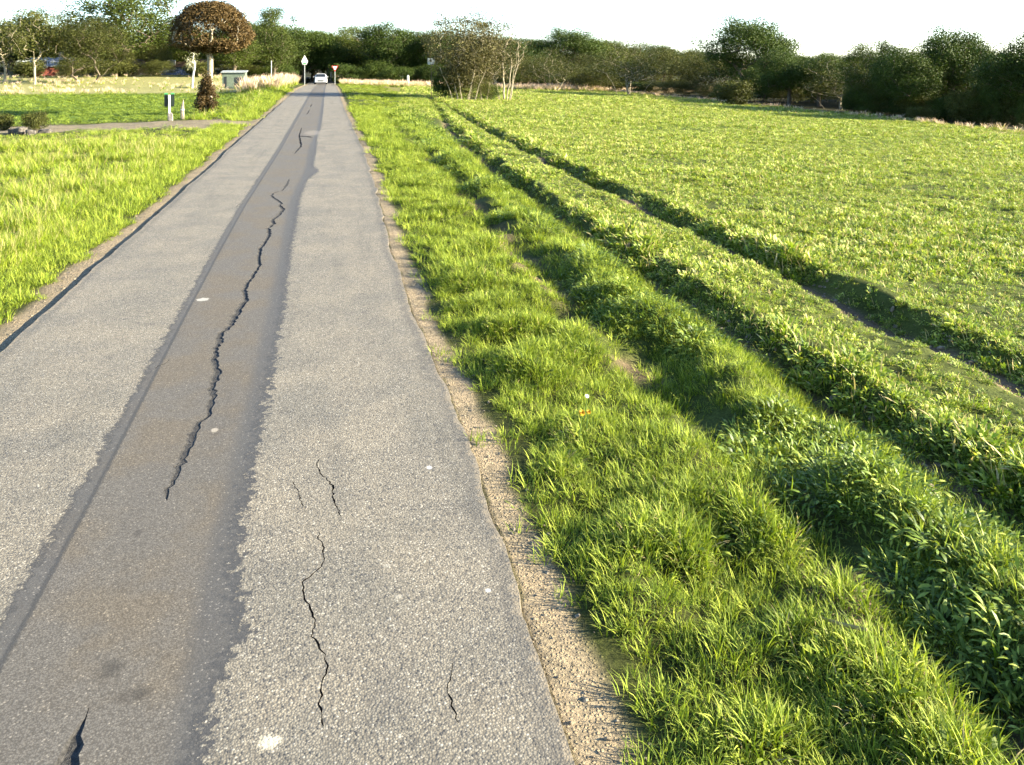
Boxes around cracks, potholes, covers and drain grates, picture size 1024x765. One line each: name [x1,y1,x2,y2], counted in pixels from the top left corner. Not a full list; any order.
crack [294,105,311,154]
crack [302,532,329,726]
crack [446,665,459,723]
crack [316,460,341,516]
crack [156,179,305,507]
crack [54,709,89,765]
